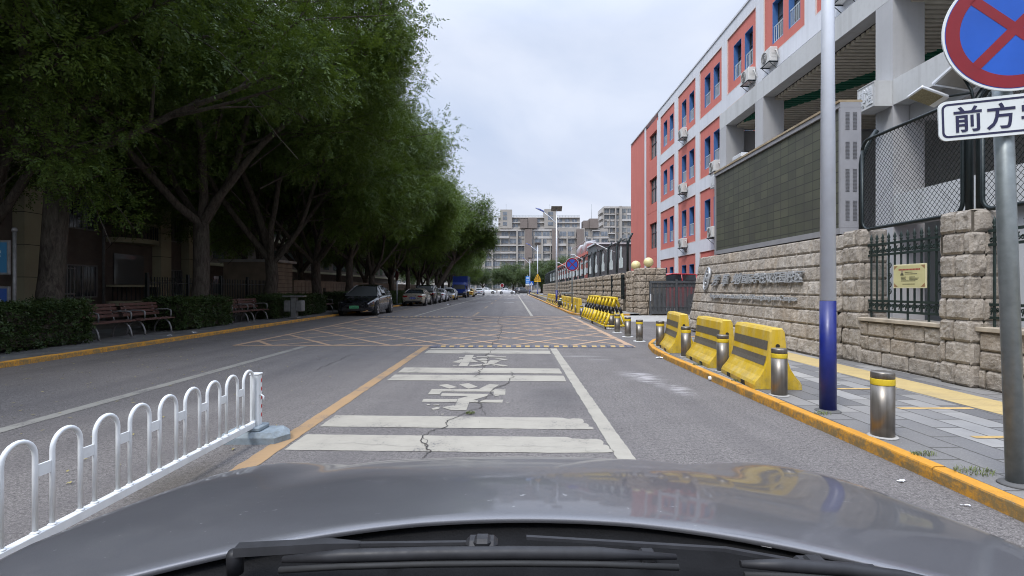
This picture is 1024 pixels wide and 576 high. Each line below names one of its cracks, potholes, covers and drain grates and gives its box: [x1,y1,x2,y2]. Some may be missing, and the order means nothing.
crack [351,314,513,459]
